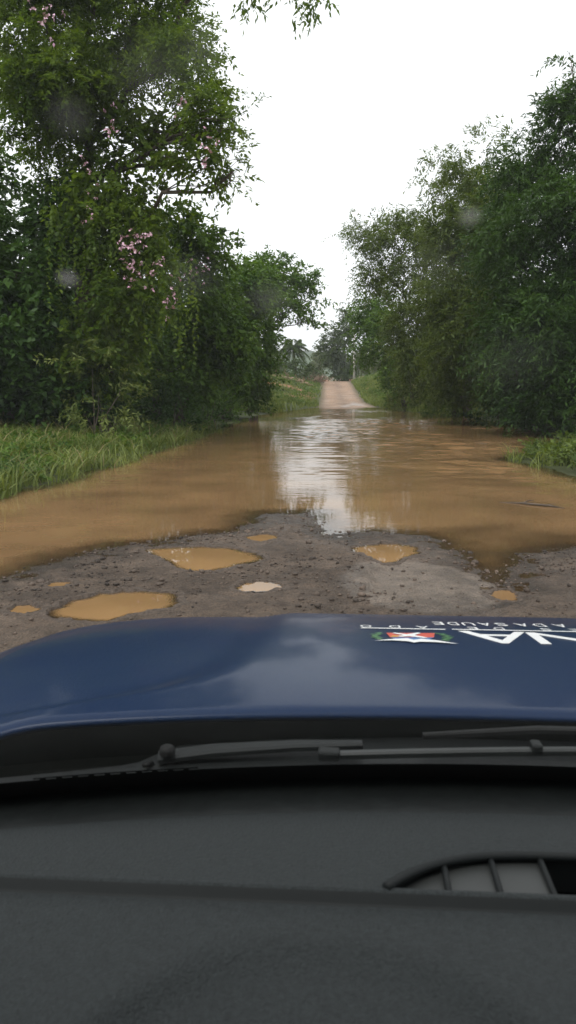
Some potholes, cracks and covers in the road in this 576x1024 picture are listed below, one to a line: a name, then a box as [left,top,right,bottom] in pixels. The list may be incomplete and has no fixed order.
pothole [237,532,286,544]
pothole [227,578,295,595]
pothole [38,586,190,625]
pothole [481,588,527,602]
pothole [140,544,273,573]
pothole [0,599,52,617]
pothole [345,540,428,566]
